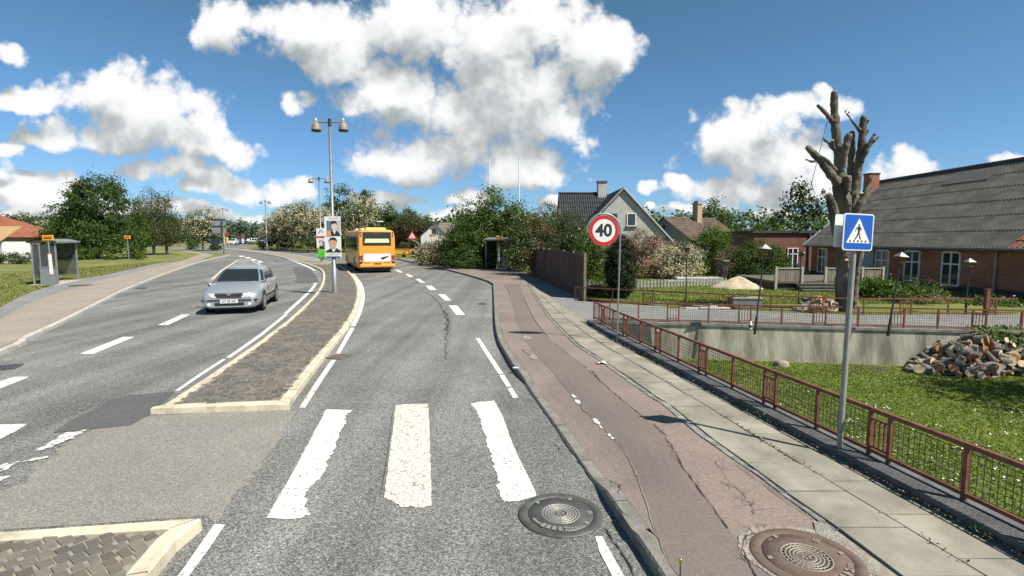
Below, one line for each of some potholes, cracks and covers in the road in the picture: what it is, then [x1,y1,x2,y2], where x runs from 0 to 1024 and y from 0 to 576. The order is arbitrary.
crack [430,294,457,362]
manhole cover [749,528,870,576]
manhole cover [519,493,603,539]
crack [689,457,767,576]
crack [605,520,635,576]
